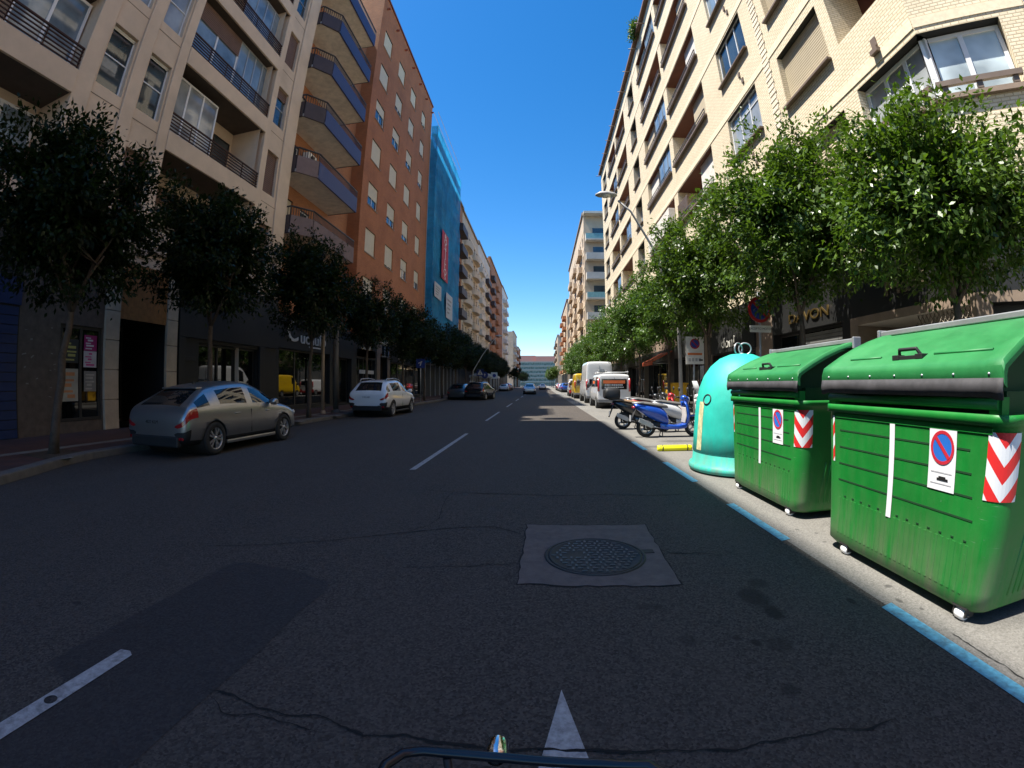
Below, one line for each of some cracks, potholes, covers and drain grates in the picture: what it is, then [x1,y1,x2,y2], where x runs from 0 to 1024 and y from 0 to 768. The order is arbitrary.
crack [217,490,678,546]
crack [210,689,893,754]
manhole cover [516,524,683,587]
